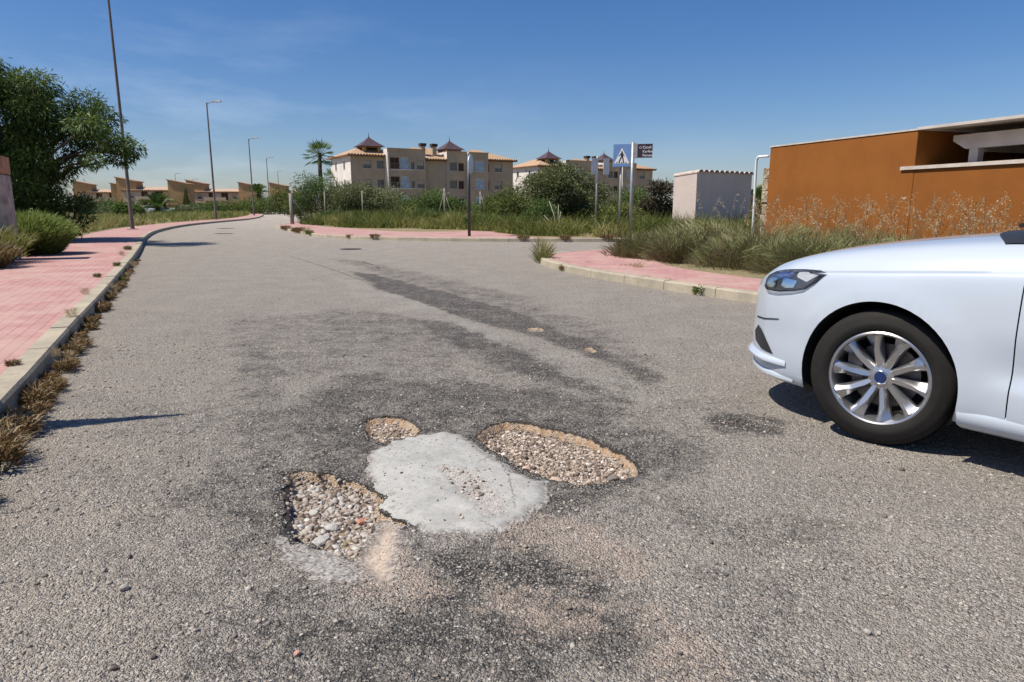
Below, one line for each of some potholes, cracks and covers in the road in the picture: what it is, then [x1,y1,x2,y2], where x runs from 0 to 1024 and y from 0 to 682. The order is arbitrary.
pothole [474,421,641,485]
pothole [281,470,407,559]
pothole [362,416,423,443]
